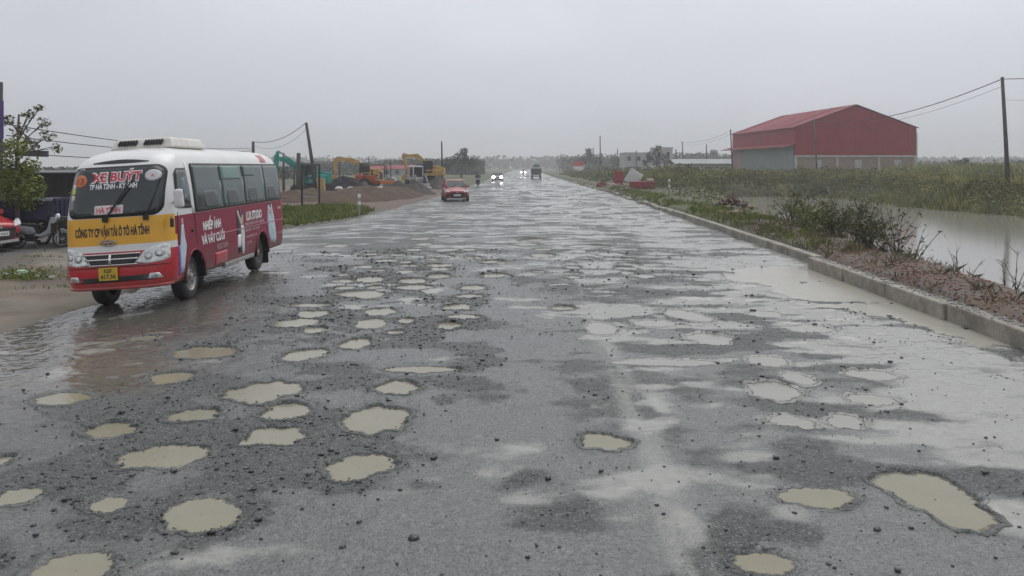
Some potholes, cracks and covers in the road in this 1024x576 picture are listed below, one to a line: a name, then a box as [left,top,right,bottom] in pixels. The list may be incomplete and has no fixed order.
pothole [26,389,100,407]
pothole [367,377,427,396]
pothole [333,401,417,438]
pothole [0,483,54,508]
pothole [720,542,808,576]
pothole [227,422,314,448]
pothole [149,492,257,537]
pothole [142,368,203,386]
pothole [314,449,409,485]
pothole [213,378,311,406]
pothole [574,429,640,453]
pothole [165,344,244,360]
